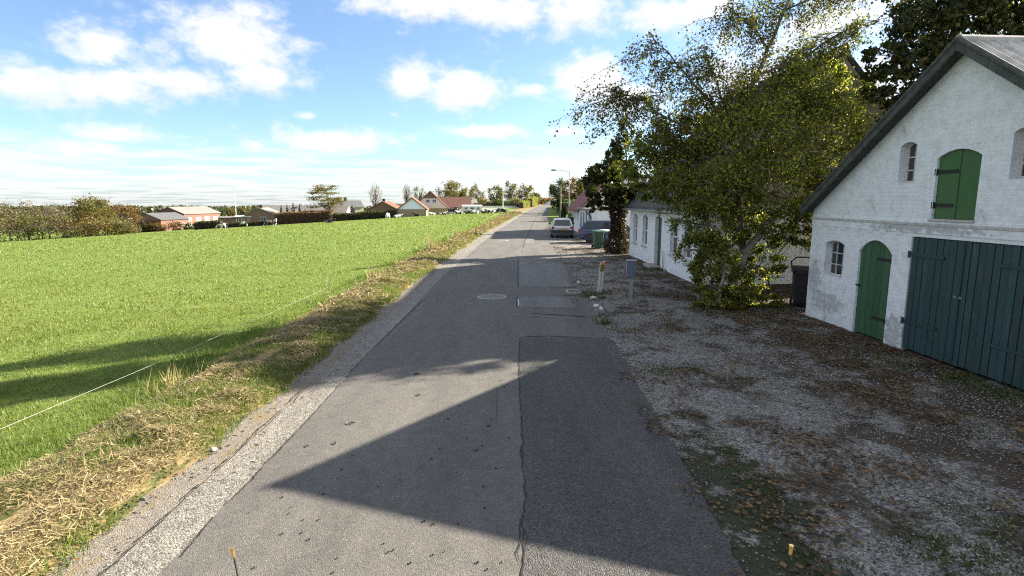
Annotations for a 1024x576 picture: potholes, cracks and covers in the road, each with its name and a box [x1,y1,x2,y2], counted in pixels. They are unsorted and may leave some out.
crack [516,343,528,576]
